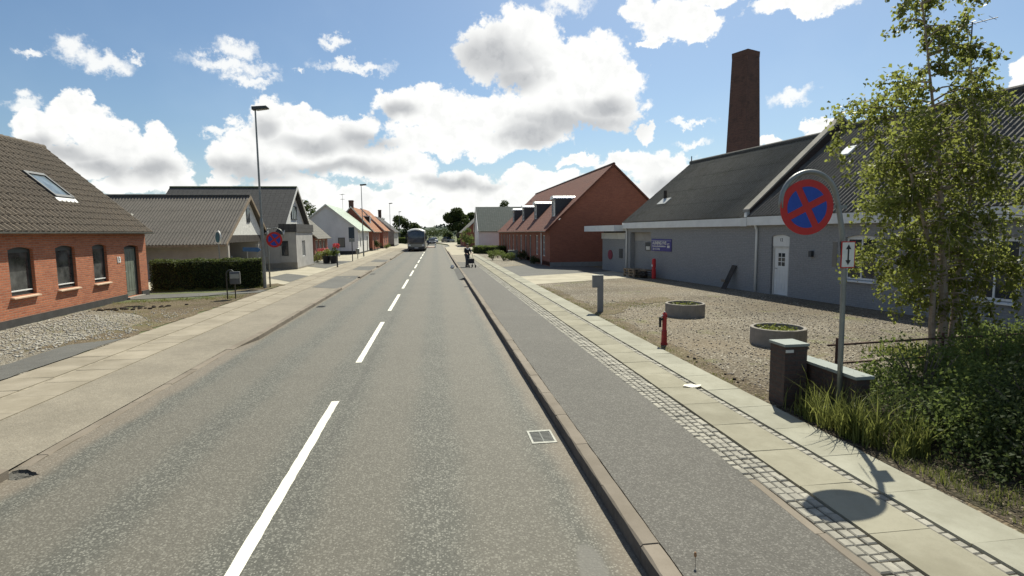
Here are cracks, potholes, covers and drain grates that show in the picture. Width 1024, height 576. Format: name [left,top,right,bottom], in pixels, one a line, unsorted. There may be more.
pothole [9,469,39,480]
drain grate [527,429,557,444]
